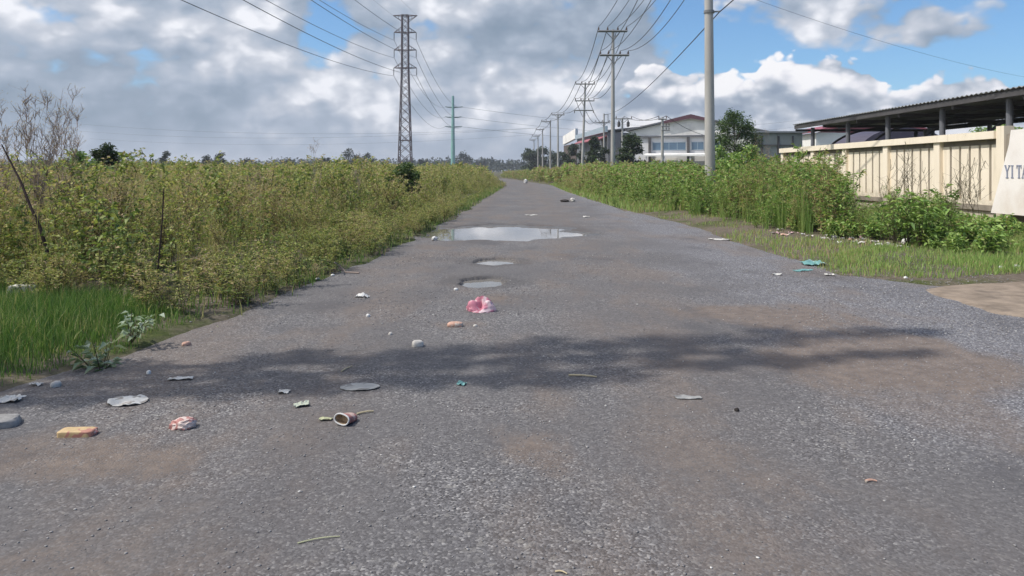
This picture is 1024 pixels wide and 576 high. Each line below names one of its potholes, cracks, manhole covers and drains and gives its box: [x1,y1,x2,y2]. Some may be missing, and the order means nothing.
pothole [463,257,528,267]
pothole [413,223,608,242]
pothole [447,274,519,290]
